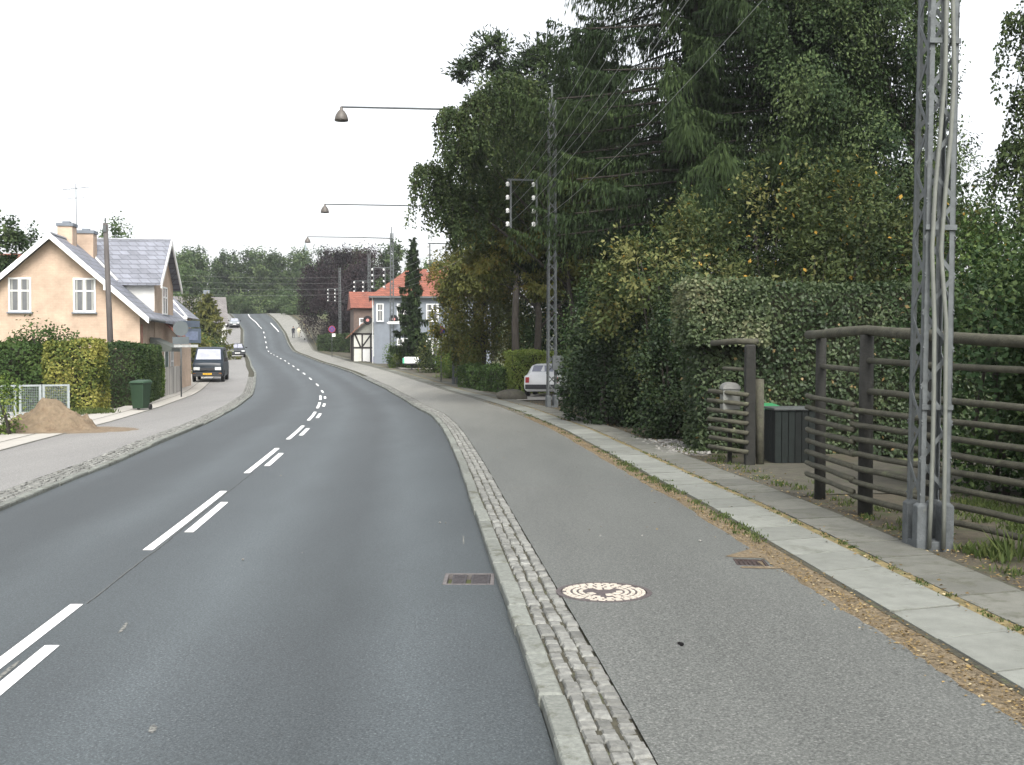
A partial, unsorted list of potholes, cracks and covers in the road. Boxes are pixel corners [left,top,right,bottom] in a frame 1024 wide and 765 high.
manhole cover [556,582,652,602]
drain grate [442,573,495,585]
